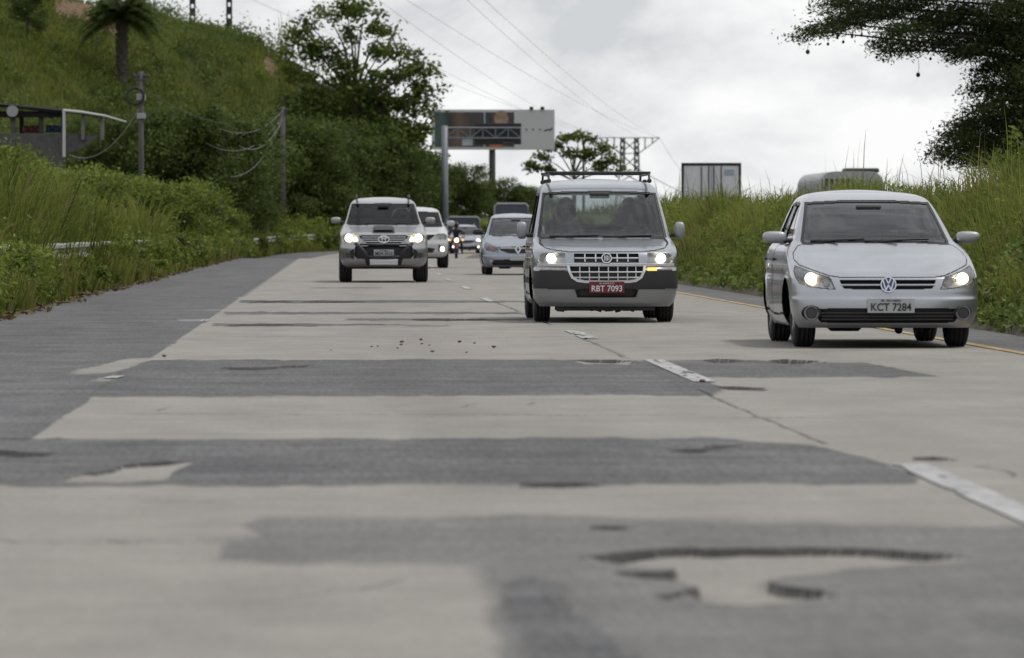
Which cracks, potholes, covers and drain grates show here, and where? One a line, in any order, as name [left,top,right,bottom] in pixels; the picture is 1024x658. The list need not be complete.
pothole [60,461,198,484]
pothole [576,547,987,606]
